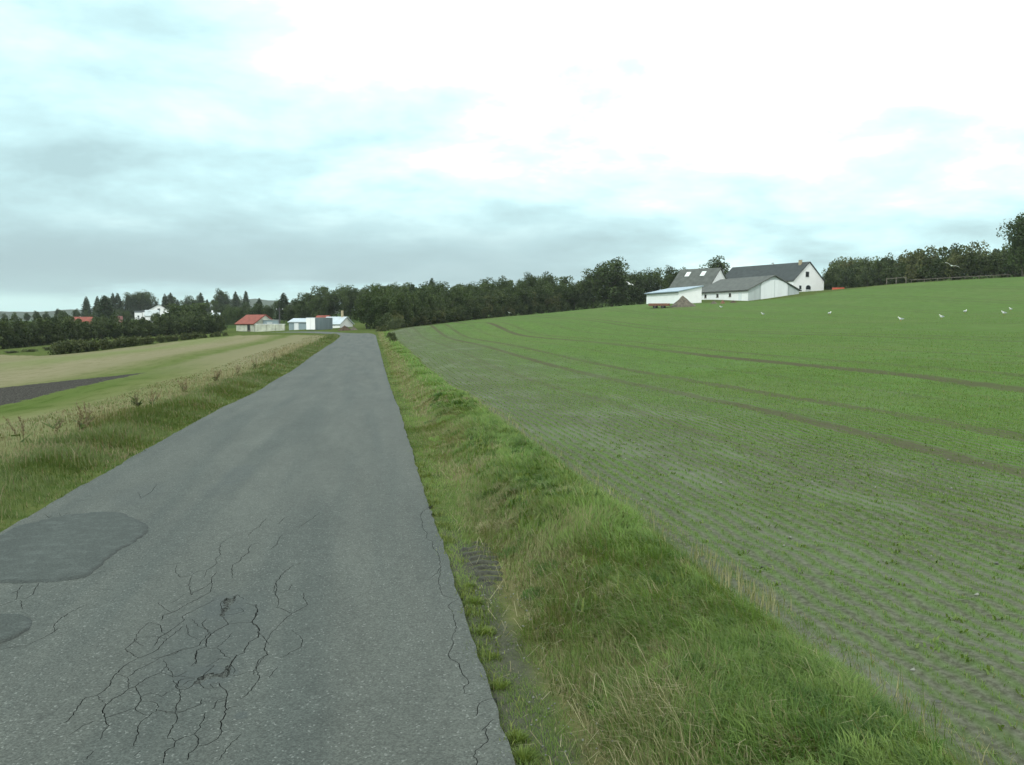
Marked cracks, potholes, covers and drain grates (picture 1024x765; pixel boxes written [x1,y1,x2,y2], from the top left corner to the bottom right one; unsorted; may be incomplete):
crack [56,537,307,763]
crack [420,506,497,765]
